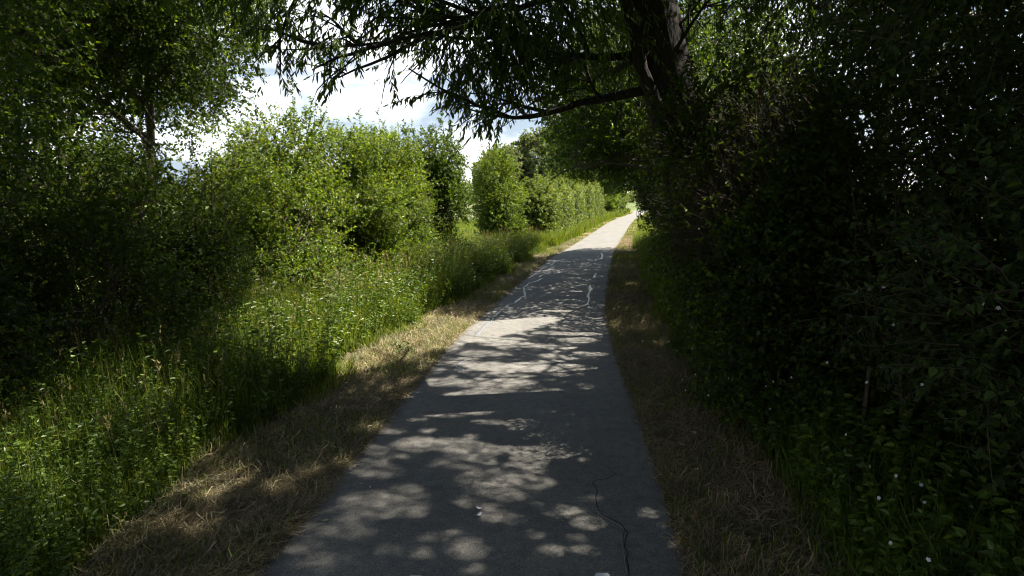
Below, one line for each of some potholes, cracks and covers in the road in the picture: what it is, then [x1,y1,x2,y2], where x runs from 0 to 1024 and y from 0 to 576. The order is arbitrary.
crack [593,466,630,576]
